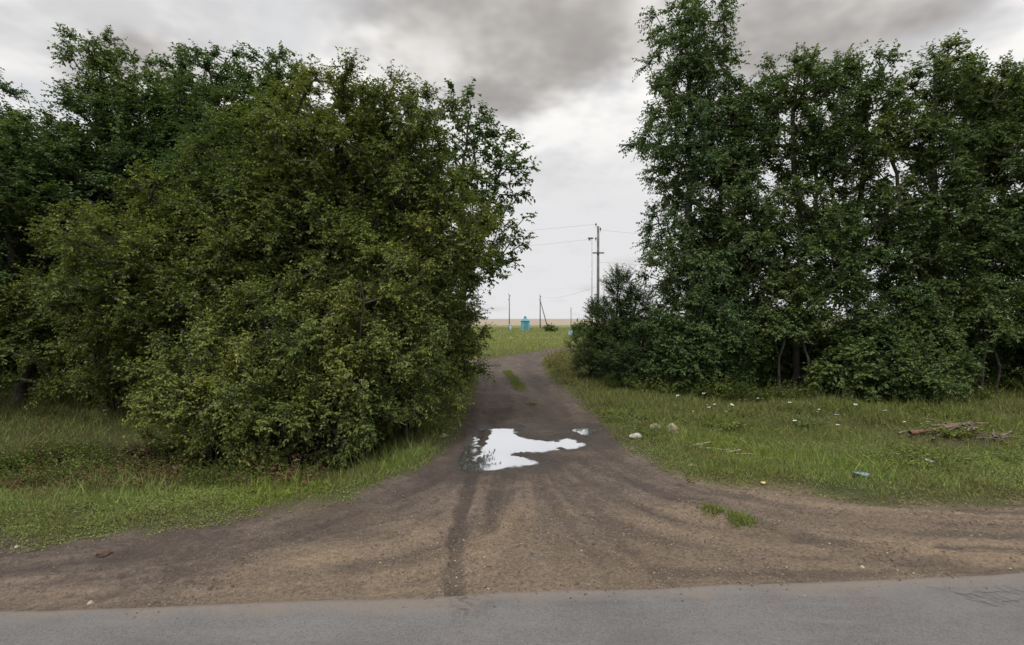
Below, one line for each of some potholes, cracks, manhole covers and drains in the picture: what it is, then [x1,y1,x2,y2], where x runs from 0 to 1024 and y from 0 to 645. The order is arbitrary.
pothole [445,424,605,475]
crack [932,585,1023,607]
